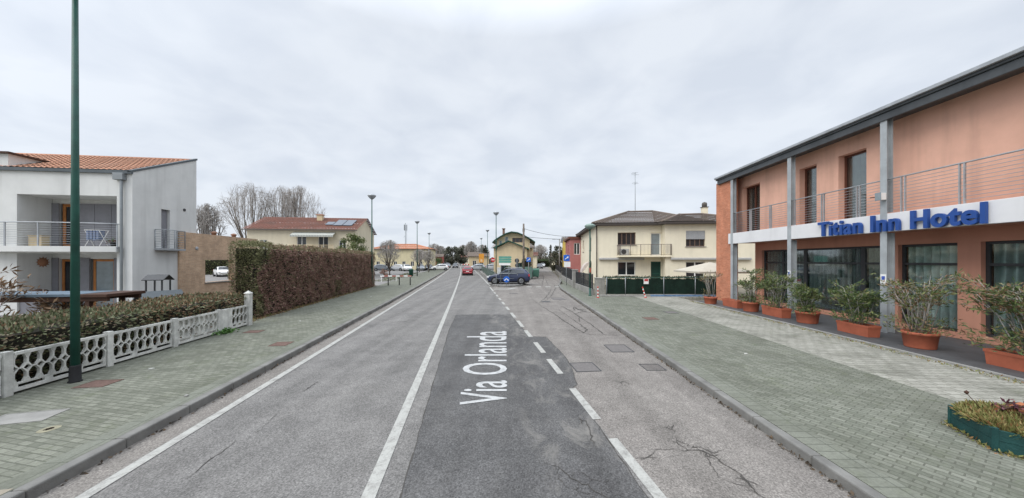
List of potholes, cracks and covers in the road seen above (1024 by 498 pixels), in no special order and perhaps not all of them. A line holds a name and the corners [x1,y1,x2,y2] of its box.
crack [535,276,605,335]
manhole cover [569,362,602,372]
crack [638,425,765,498]
manhole cover [72,379,124,388]
